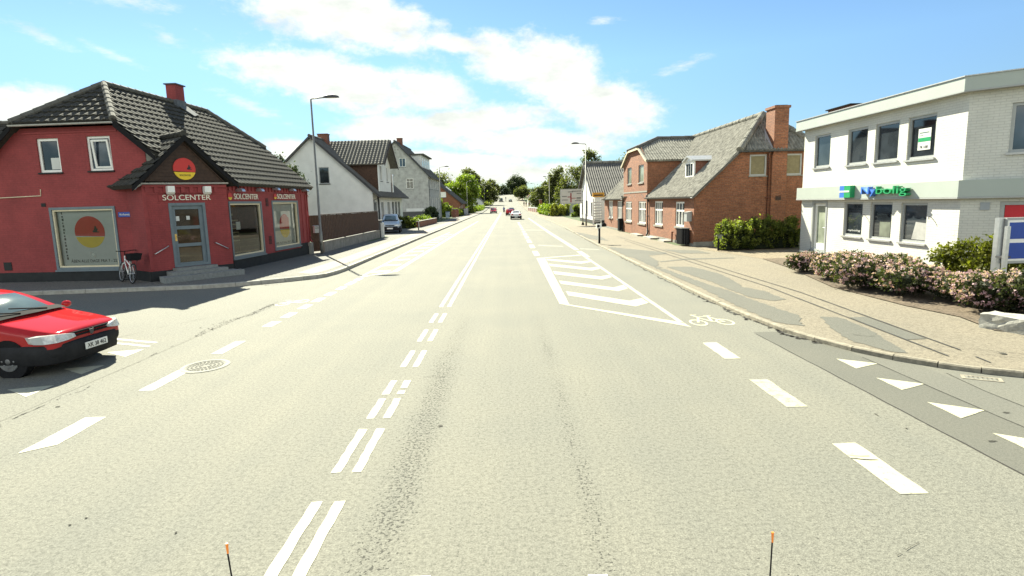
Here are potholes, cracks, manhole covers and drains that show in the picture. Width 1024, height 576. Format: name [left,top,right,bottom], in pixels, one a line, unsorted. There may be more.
manhole cover [179,359,231,373]
